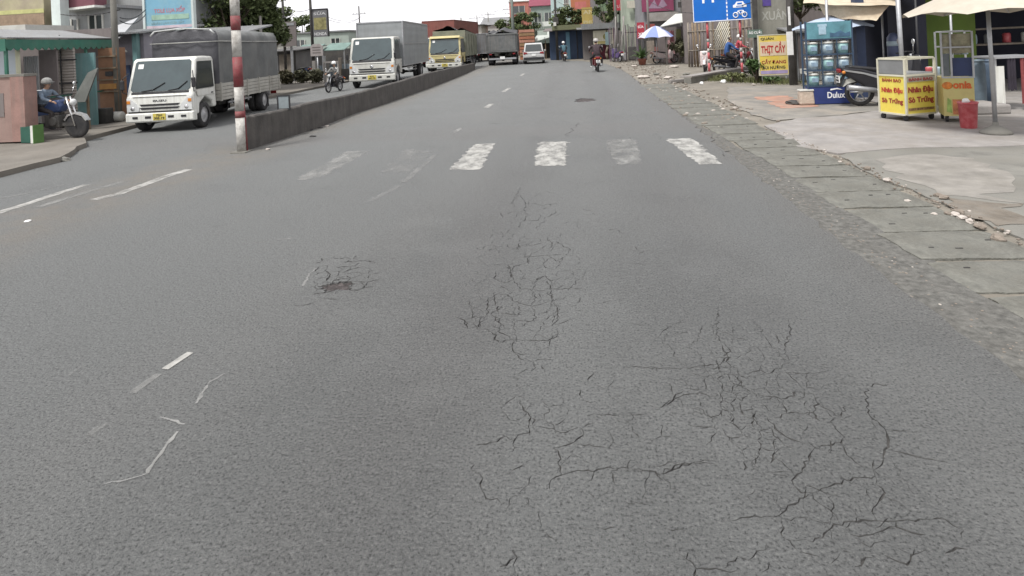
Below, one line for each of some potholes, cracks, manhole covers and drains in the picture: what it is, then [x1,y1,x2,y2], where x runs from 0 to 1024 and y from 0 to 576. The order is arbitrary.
pothole [318,281,355,291]
crack [455,189,968,576]
